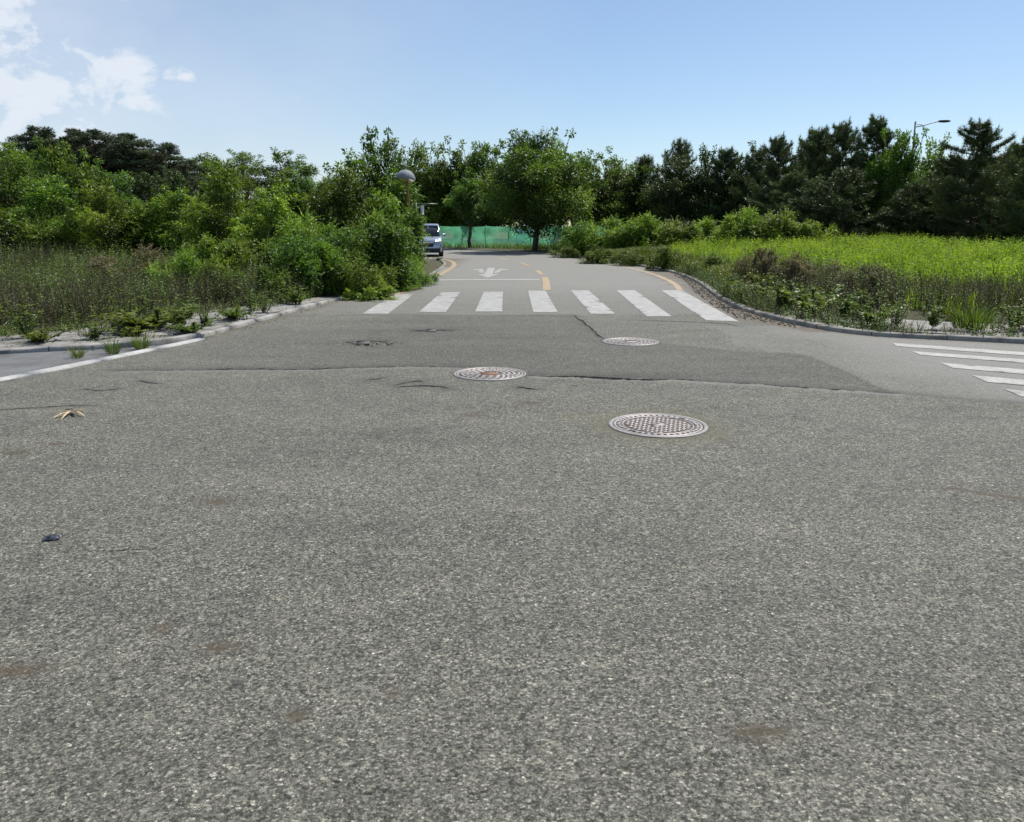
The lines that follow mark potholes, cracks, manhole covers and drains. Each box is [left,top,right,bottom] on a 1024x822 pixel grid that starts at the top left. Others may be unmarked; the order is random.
manhole cover [602,337,659,346]
crack [574,315,604,339]
manhole cover [608,413,708,438]
crack [139,366,446,388]
manhole cover [453,367,526,381]
